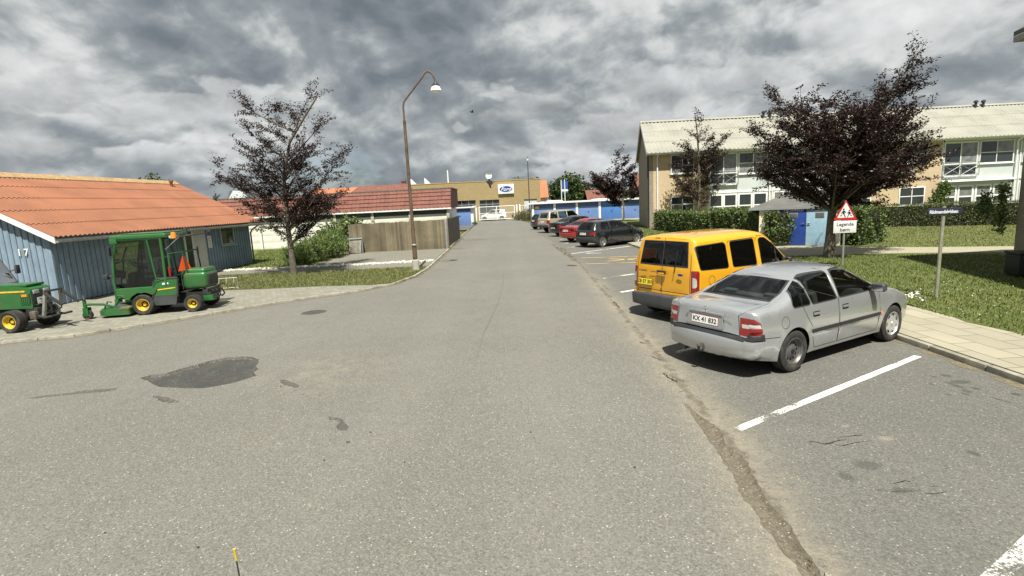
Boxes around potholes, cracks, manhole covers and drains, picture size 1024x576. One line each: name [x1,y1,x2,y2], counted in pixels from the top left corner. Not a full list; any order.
crack [884,480,947,494]
crack [810,435,872,446]
